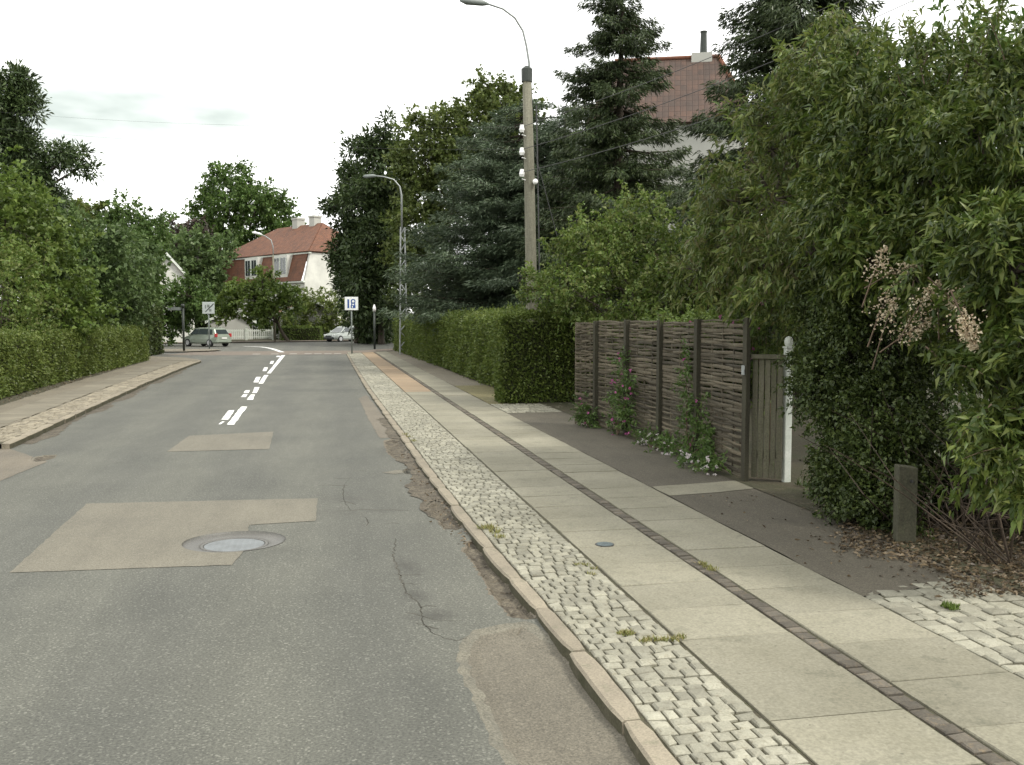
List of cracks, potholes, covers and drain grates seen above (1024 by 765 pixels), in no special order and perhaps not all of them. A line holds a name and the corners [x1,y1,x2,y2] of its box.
pothole [426,500,463,530]
pothole [384,439,408,460]
crack [318,478,464,641]
manhole cover [181,531,286,552]
pothole [461,538,536,619]
